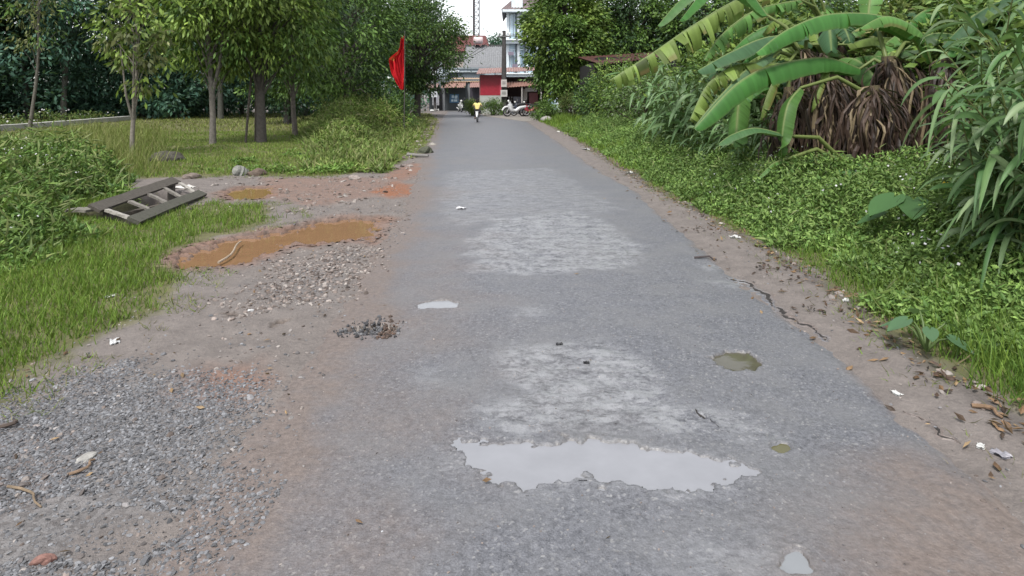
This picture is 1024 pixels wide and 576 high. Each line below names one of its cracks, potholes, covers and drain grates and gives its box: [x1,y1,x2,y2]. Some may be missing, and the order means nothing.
pothole [696,346,772,376]
crack [726,277,831,342]
pothole [154,214,399,274]
pothole [410,298,466,311]
pothole [430,427,775,503]
